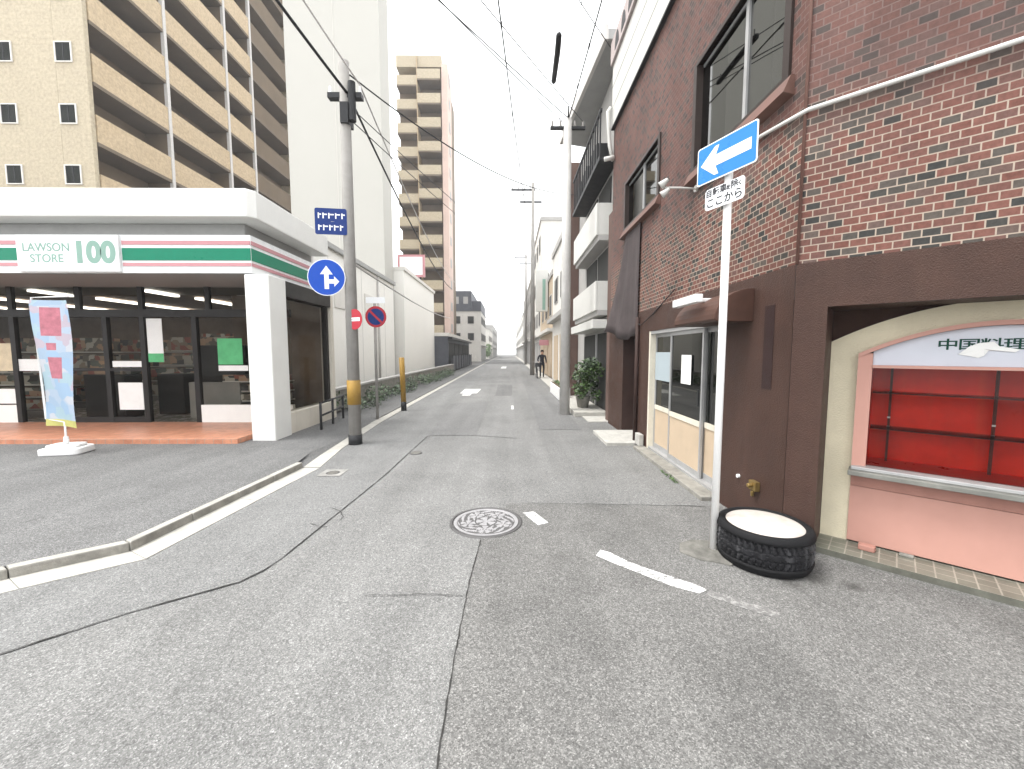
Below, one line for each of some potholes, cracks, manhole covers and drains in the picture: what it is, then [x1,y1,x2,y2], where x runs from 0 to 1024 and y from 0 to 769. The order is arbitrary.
manhole cover [449,507,522,539]
crack [0,439,424,654]
